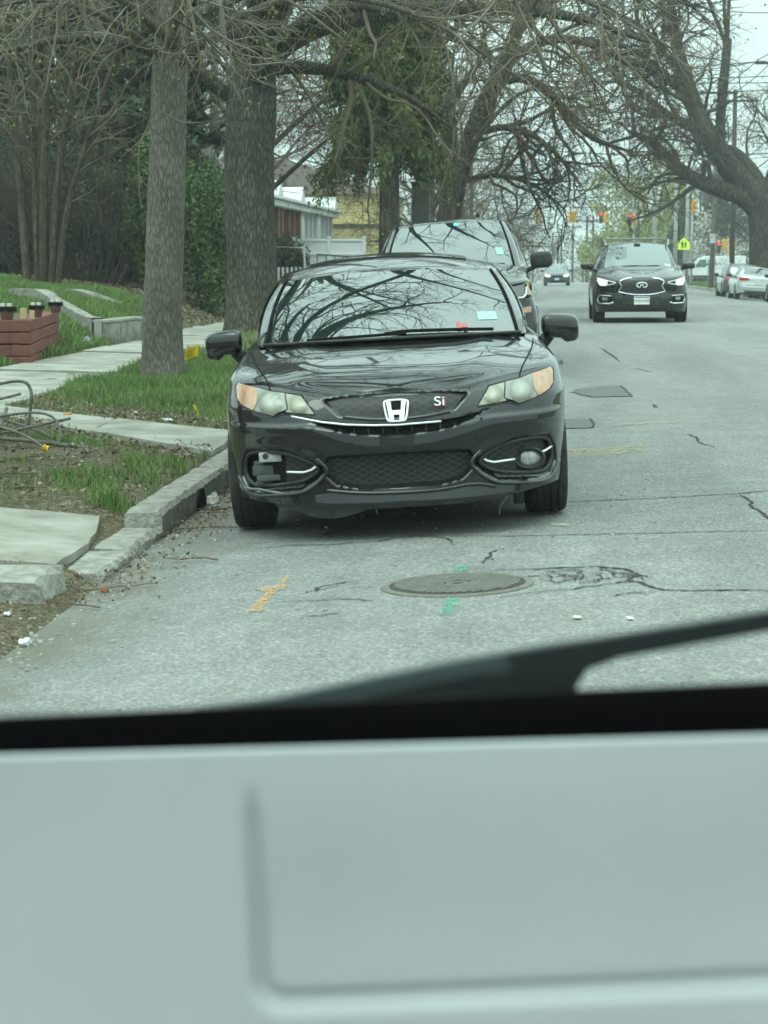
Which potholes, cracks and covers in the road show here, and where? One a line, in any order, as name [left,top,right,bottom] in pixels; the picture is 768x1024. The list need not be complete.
manhole cover [381,572,534,598]
crack [250,490,768,563]
crack [280,579,373,617]
crack [499,566,755,598]
